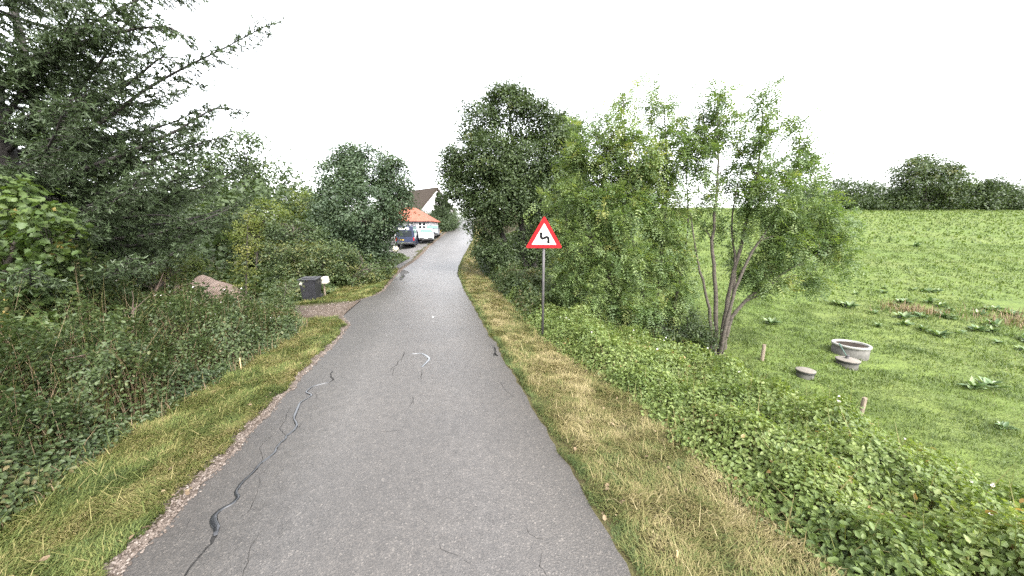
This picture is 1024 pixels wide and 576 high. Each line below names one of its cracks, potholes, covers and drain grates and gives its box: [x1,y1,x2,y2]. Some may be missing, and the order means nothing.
crack [391,353,431,379]
crack [178,371,334,576]
